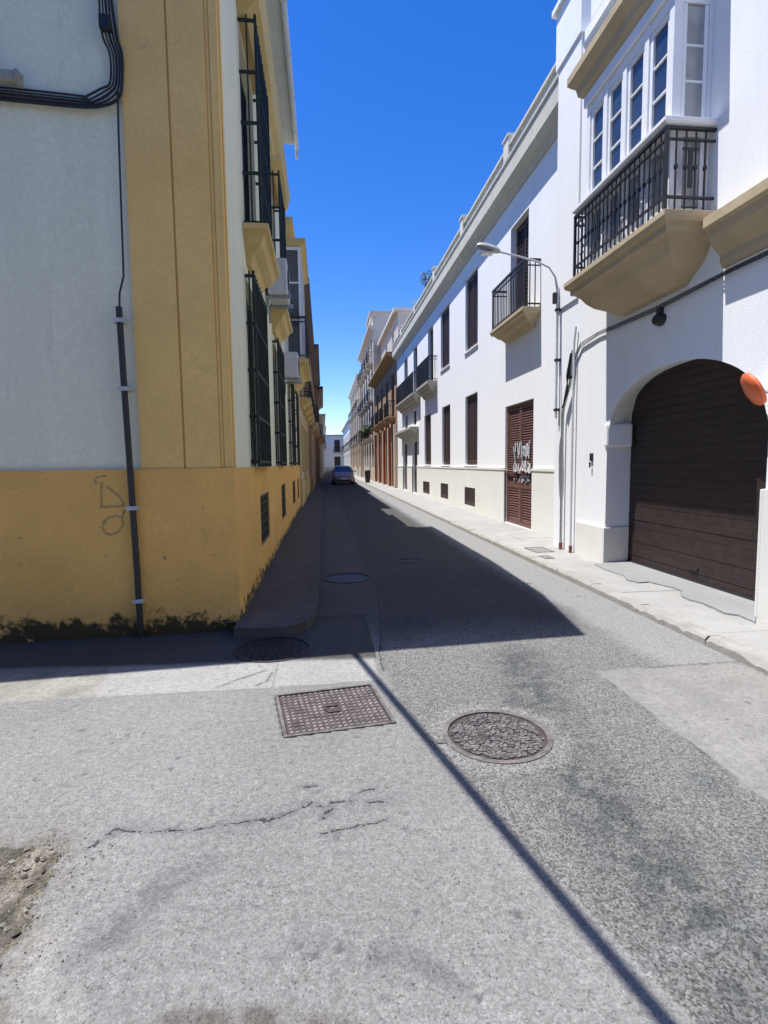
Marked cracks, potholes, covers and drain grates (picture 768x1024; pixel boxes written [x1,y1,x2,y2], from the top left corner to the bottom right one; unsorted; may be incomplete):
crack [88,785,386,848]
manhole cover [234,636,312,663]
manhole cover [436,709,553,764]
manhole cover [323,573,372,584]
